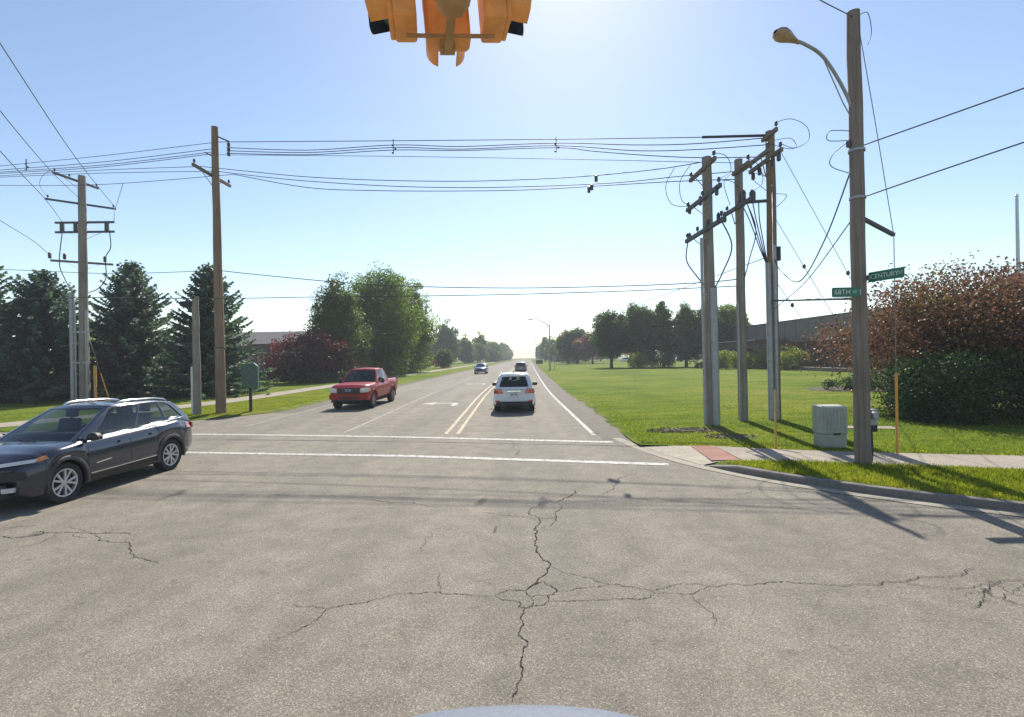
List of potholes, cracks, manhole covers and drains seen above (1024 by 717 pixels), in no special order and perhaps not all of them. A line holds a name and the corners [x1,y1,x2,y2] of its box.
crack [271,574,494,641]
crack [488,490,1024,700]
crack [3,525,158,563]
